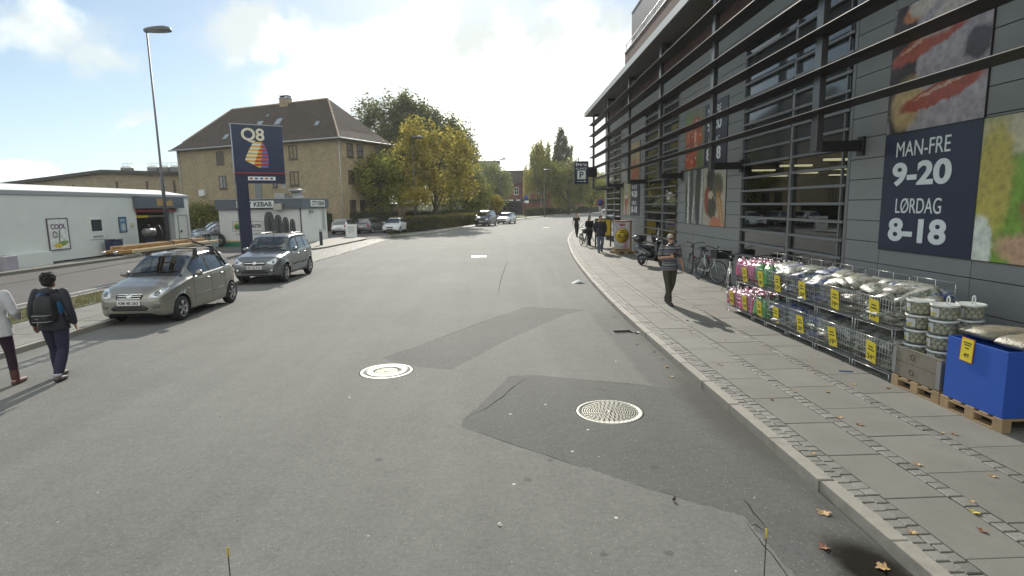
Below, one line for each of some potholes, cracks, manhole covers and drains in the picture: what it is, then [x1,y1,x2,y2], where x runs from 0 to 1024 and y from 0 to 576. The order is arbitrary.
manhole cover [359,364,413,379]
crack [465,380,586,469]
manhole cover [575,400,644,424]
